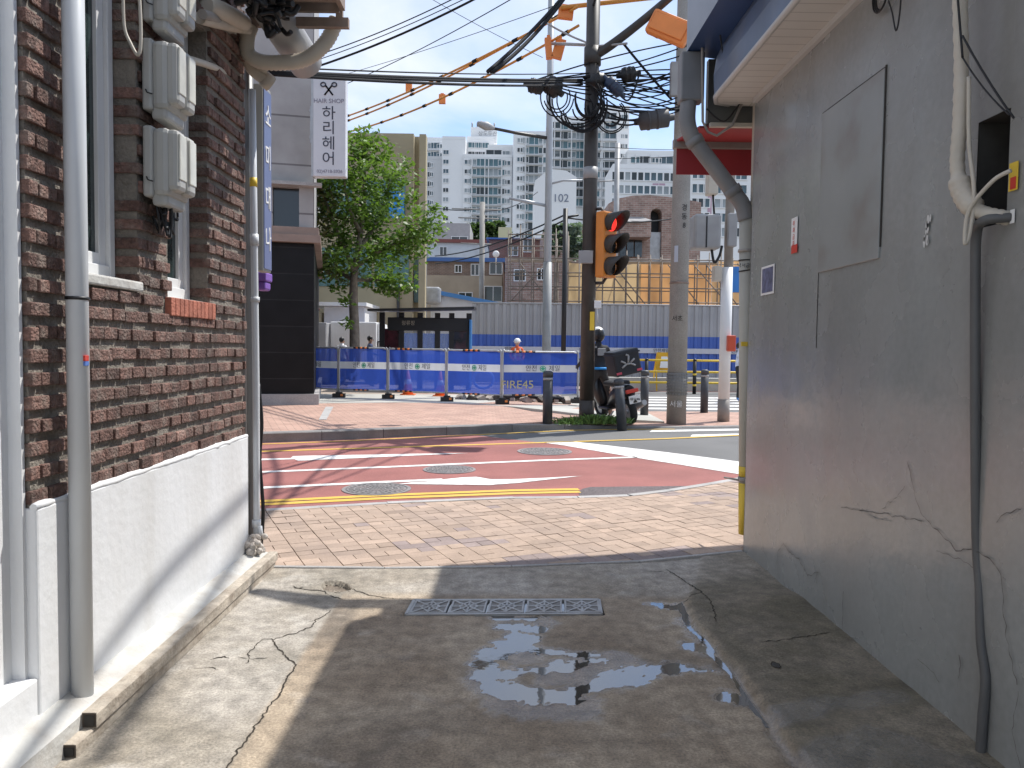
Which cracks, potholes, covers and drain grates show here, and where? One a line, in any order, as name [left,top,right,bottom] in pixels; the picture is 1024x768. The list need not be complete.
manhole cover [517,447,572,455]
crack [654,570,717,620]
crack [205,586,396,768]
manhole cover [342,483,411,495]
manhole cover [423,465,476,474]
pothole [319,581,350,593]
